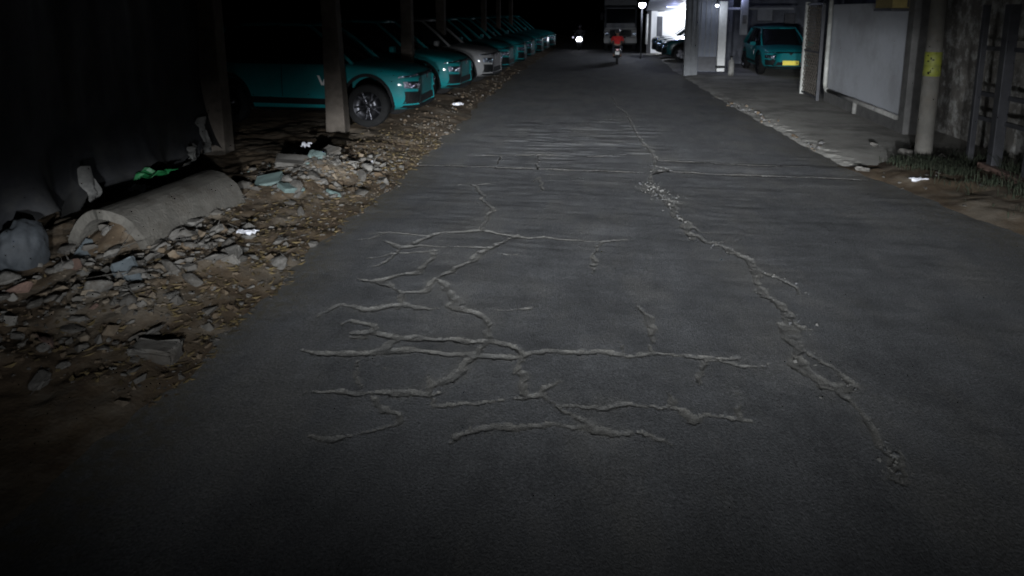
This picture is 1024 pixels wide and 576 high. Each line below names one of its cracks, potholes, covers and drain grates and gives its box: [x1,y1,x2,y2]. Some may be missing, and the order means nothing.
crack [299,96,912,487]
